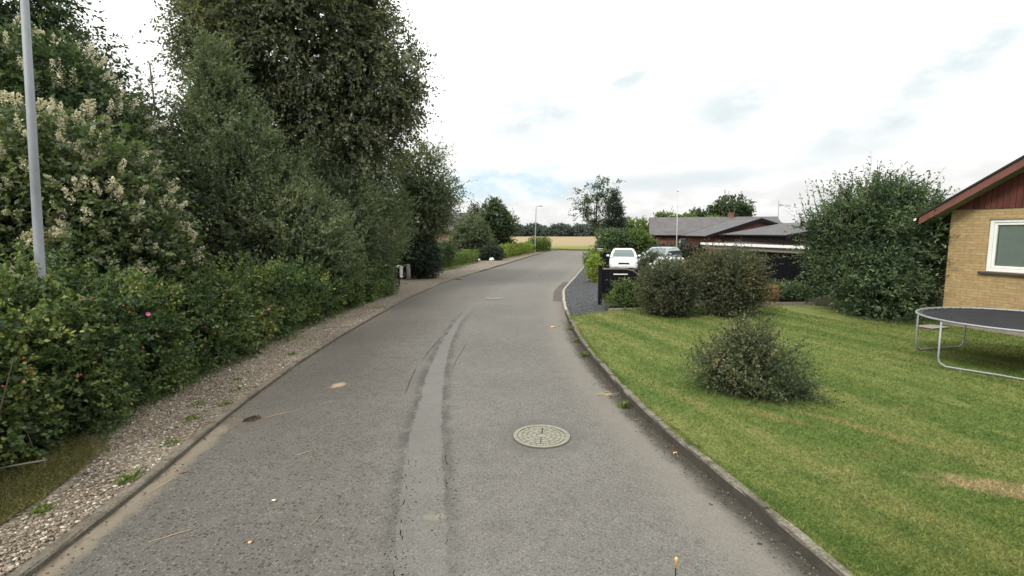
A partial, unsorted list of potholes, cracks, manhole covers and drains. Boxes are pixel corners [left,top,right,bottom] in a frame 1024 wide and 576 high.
manhole cover [513,425,571,449]
crack [431,456,462,546]
